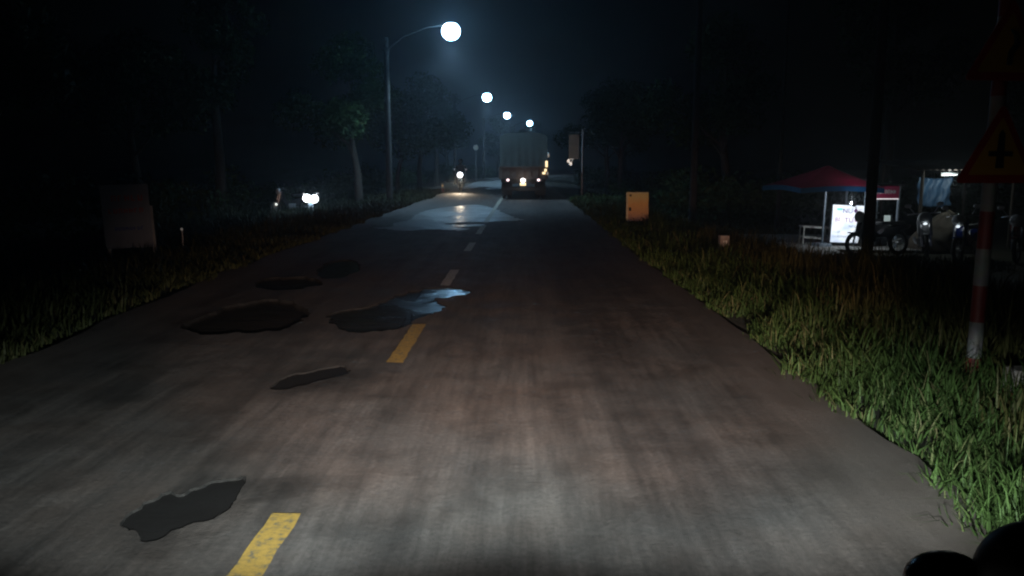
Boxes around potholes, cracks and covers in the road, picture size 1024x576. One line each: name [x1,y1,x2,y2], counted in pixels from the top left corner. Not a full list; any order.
pothole [316,260,361,279]
pothole [180,299,311,335]
pothole [120,476,246,542]
pothole [325,287,471,333]
pothole [255,277,323,290]
pothole [270,365,351,390]
